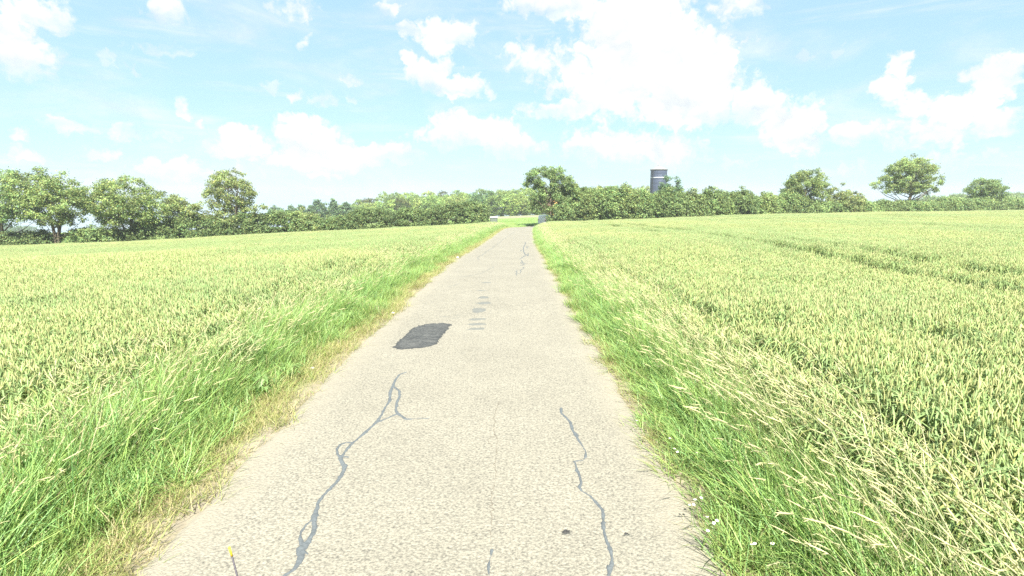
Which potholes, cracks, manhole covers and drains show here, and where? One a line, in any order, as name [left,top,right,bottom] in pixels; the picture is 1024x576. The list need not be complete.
crack [488,404,499,549]
pothole [558,527,573,536]
